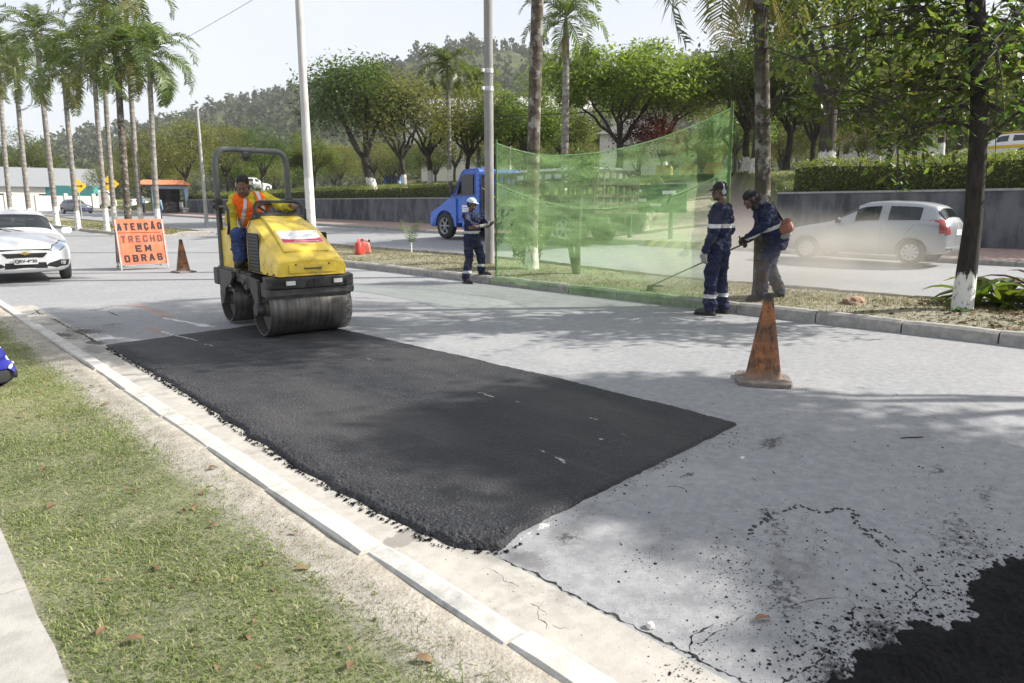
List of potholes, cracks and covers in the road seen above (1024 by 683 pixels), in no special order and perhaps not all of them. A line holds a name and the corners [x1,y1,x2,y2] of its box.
crack [689,615,744,655]
crack [772,598,868,683]
